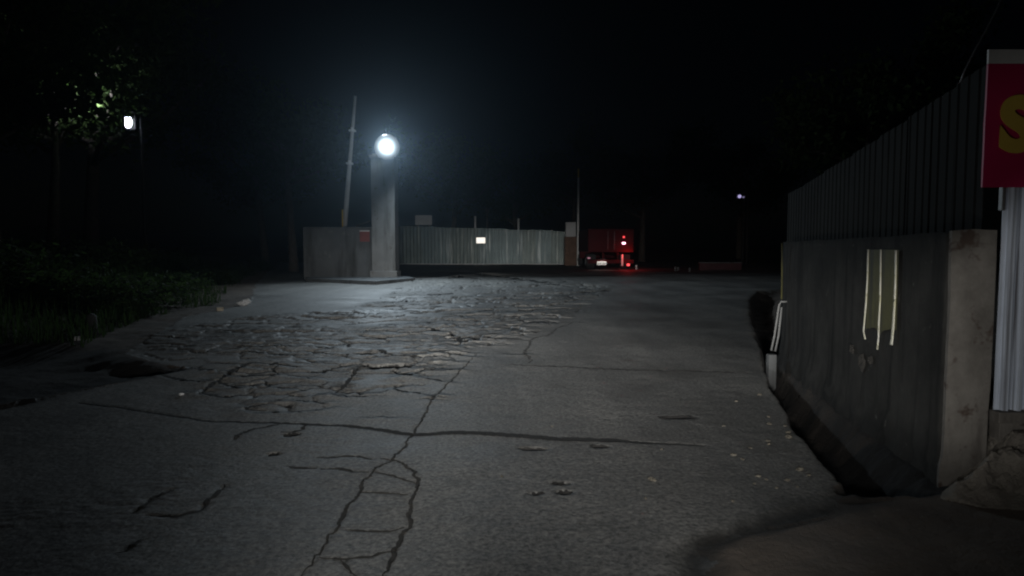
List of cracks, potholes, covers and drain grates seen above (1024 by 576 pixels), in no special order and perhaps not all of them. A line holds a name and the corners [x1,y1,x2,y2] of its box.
crack [80,275,748,576]
